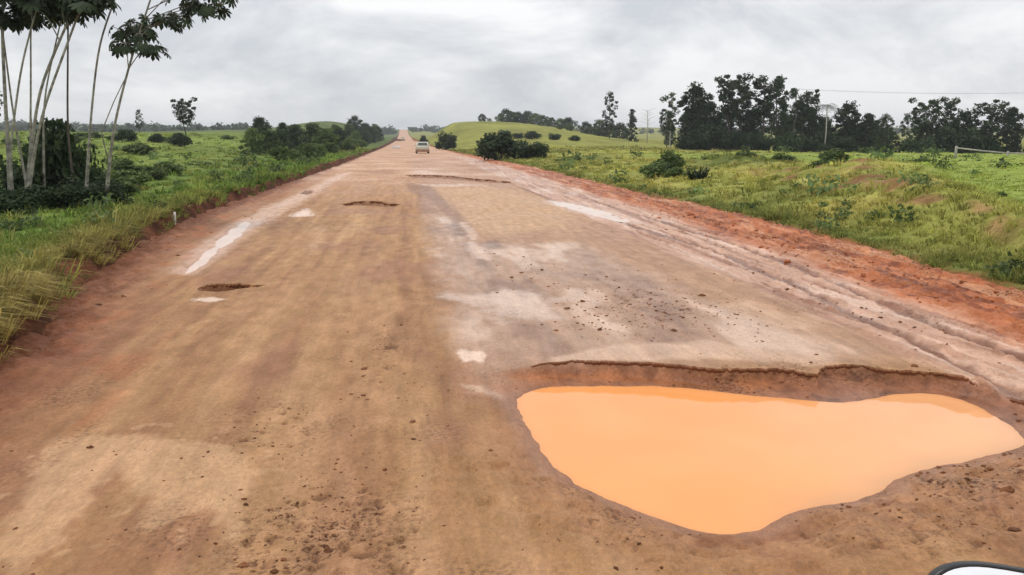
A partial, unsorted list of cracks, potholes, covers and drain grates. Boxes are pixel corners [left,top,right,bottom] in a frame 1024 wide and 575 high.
pothole [471,358,1024,570]
pothole [406,174,517,183]
pothole [191,282,269,293]
